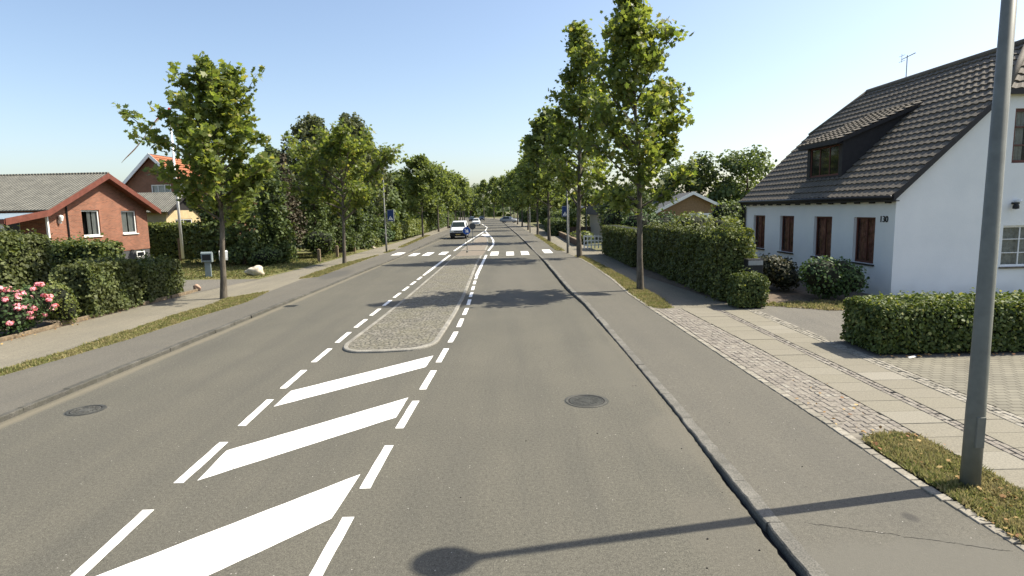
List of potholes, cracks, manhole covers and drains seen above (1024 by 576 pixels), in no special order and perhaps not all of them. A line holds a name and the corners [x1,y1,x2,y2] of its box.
manhole cover [564,394,609,408]
manhole cover [63,404,107,416]
